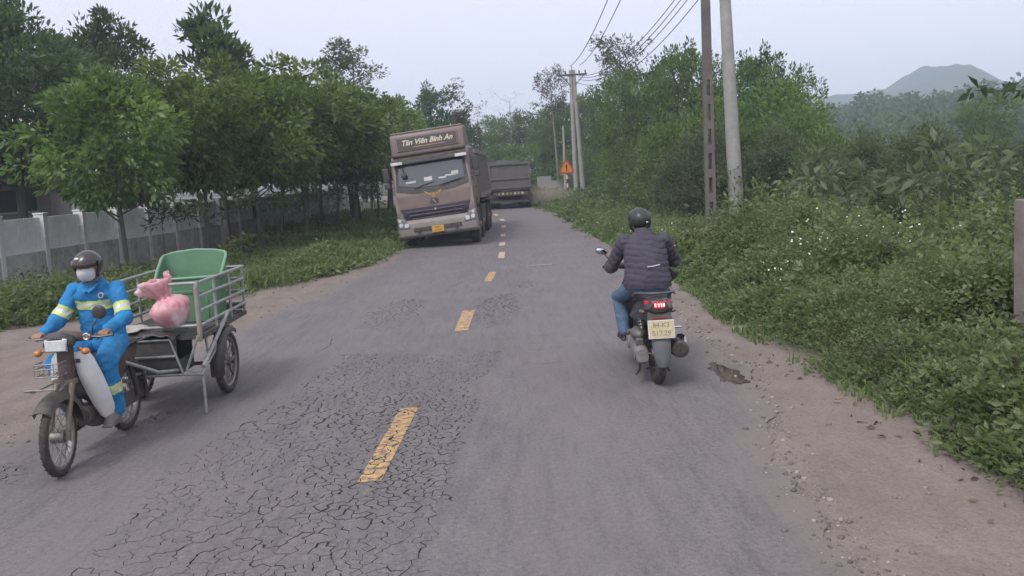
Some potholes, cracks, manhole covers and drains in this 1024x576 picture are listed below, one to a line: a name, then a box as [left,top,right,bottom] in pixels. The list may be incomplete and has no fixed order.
pothole [708,362,751,385]
crack [357,299,427,332]
crack [70,351,501,576]
crack [477,279,563,364]
